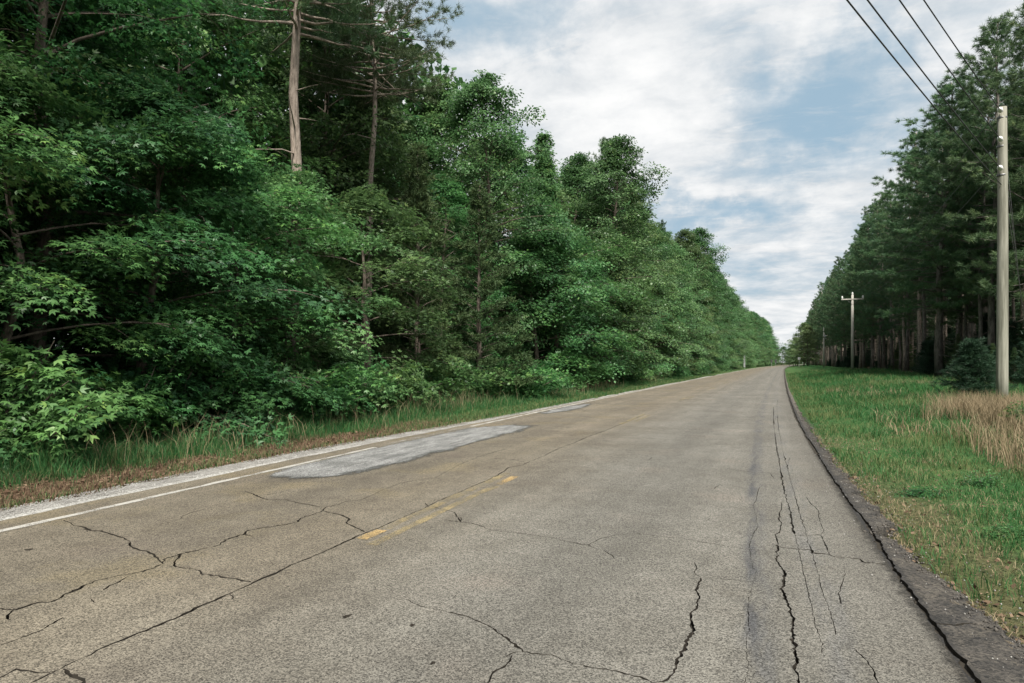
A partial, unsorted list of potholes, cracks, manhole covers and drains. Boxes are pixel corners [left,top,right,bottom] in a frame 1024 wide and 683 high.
crack [0,401,887,683]
